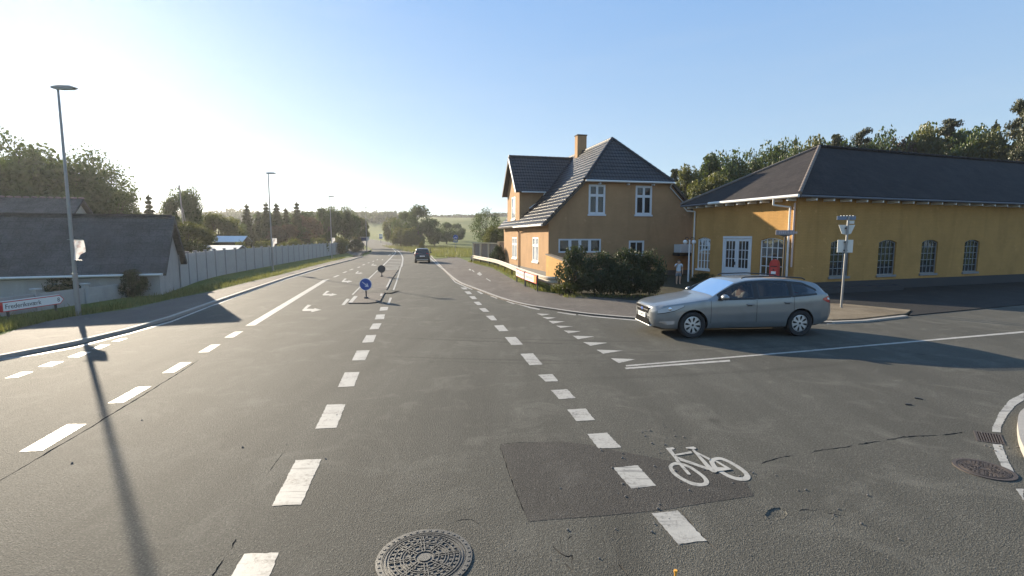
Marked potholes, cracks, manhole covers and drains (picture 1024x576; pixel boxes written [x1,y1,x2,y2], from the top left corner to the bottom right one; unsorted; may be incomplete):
crack [553,536,574,573]
manhole cover [375,529,472,576]
drain grate [973,430,1005,445]
manhole cover [952,458,1018,481]
crack [762,432,963,464]
pothole [764,507,789,521]
